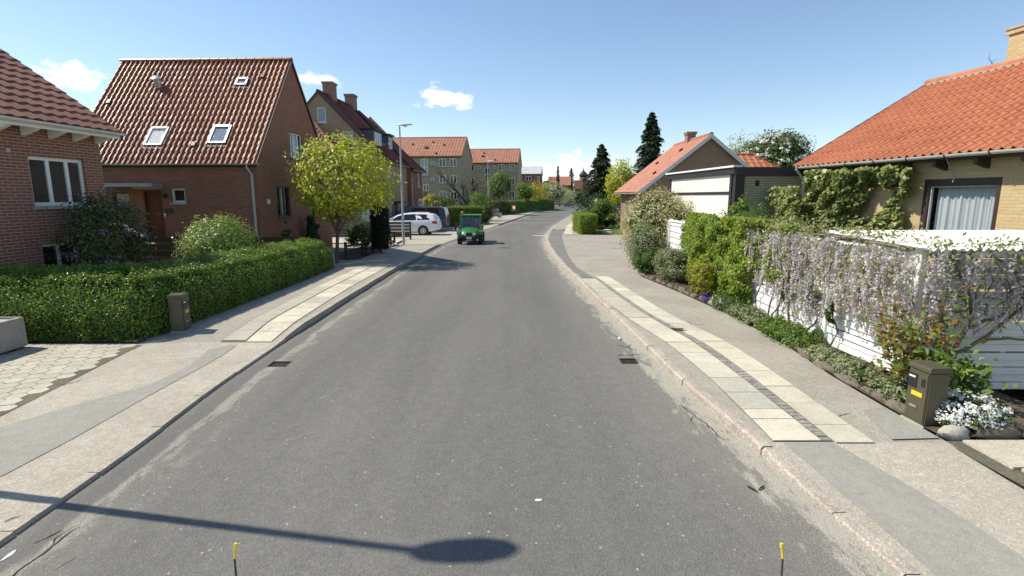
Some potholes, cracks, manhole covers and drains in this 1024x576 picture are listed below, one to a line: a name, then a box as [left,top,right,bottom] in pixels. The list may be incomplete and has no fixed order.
crack [12,526,80,576]
